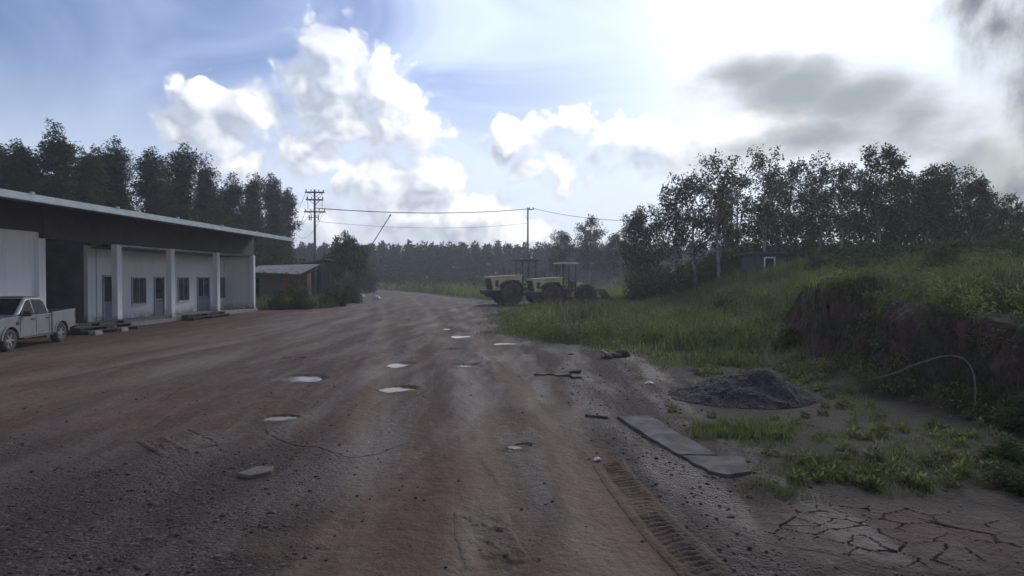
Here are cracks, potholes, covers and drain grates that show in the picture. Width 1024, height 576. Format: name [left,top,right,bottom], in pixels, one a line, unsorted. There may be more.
crack [253,434,419,463]
pothole [441,333,480,341]
crack [728,504,1024,576]
pothole [496,441,544,453]
pothole [374,361,428,371]
pothole [365,383,434,395]
pothole [254,372,345,385]
pothole [243,413,318,424]
